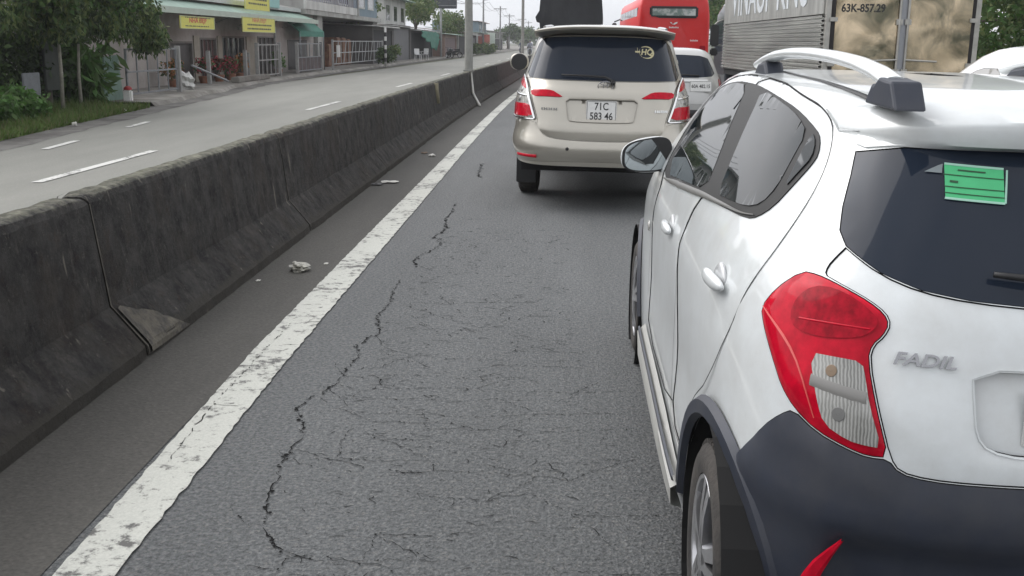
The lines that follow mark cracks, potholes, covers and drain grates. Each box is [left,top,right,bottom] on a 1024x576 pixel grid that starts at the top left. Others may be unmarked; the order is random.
crack [171,174,429,459]
crack [412,204,455,269]
crack [230,230,675,576]
